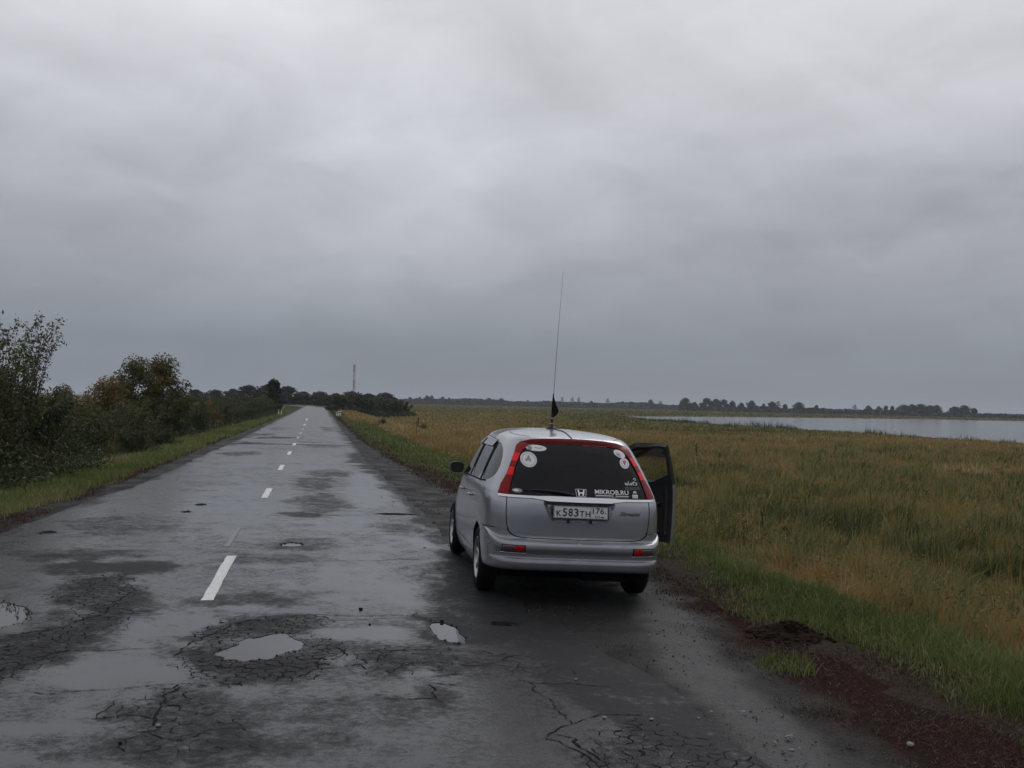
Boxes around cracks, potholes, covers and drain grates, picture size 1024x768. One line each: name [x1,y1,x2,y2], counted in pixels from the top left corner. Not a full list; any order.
crack [5,614,576,759]
crack [518,679,763,768]
pothole [213,631,304,661]
crack [0,573,150,683]
